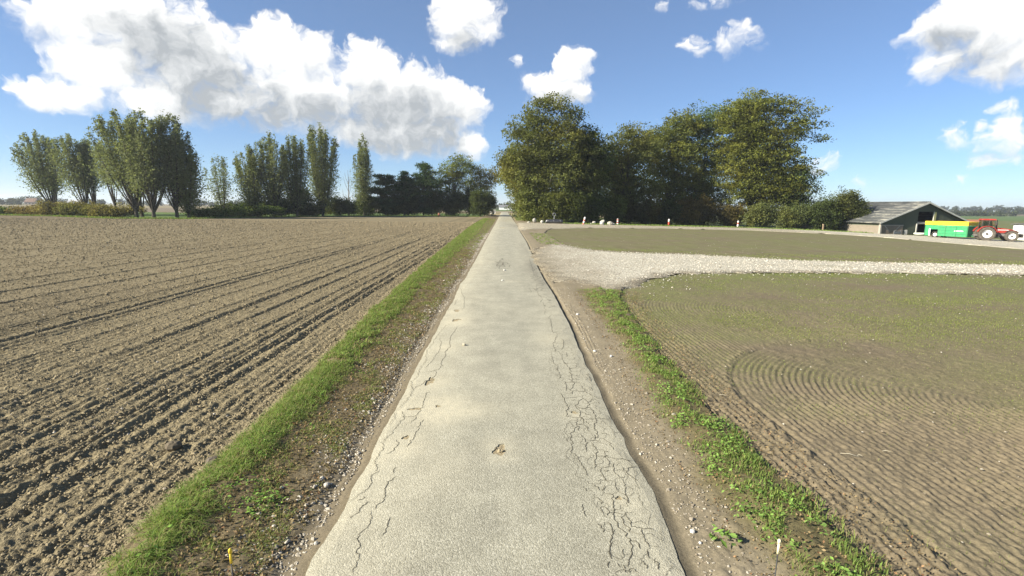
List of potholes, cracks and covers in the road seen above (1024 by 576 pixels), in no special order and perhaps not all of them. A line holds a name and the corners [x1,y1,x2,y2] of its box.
pothole [492,444,506,456]
crack [529,259,681,576]
crack [349,327,453,572]
